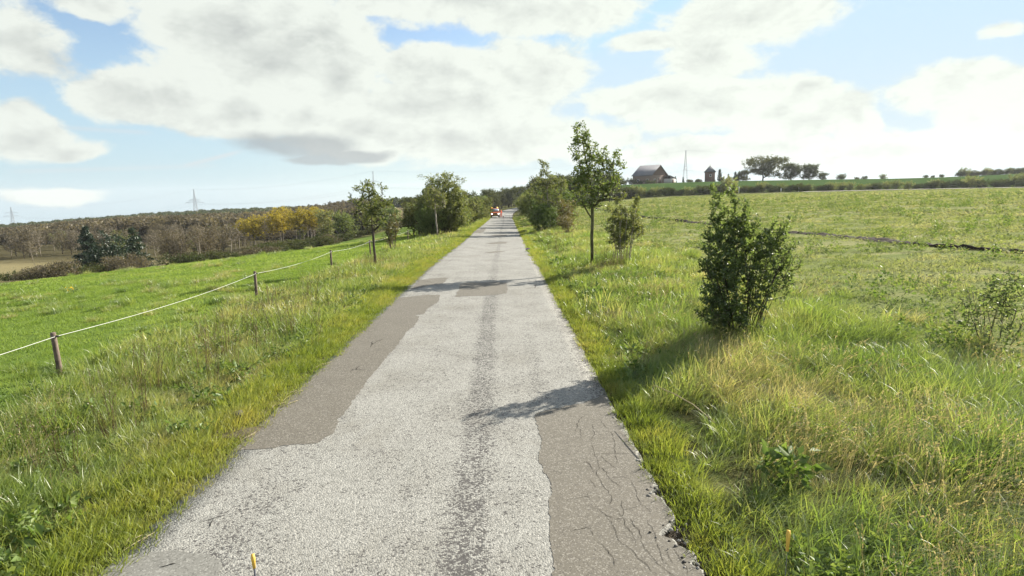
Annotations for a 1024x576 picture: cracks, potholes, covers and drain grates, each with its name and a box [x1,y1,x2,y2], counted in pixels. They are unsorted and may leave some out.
crack [577,417,688,575]
